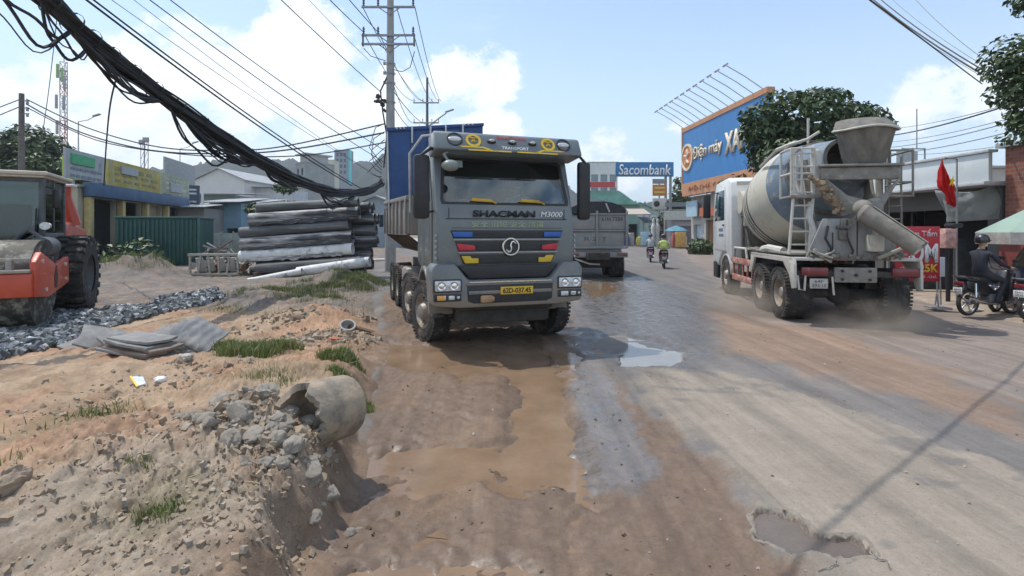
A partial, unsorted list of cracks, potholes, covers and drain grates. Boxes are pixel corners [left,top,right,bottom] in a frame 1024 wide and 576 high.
pothole [617,353,687,368]
pothole [746,506,881,564]
